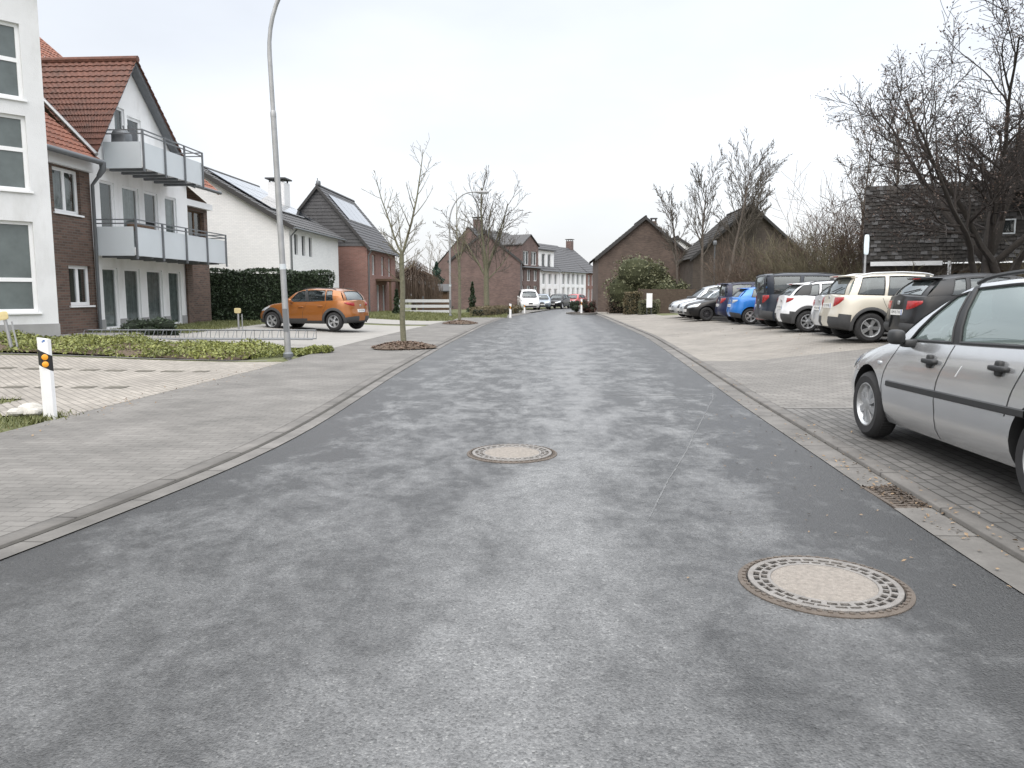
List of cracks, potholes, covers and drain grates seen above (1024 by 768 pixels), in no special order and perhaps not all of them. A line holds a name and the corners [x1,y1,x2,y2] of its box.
crack [594,391,714,521]
manhole cover [738,555,916,619]
manhole cover [467,444,557,463]
drain grate [860,484,932,534]
